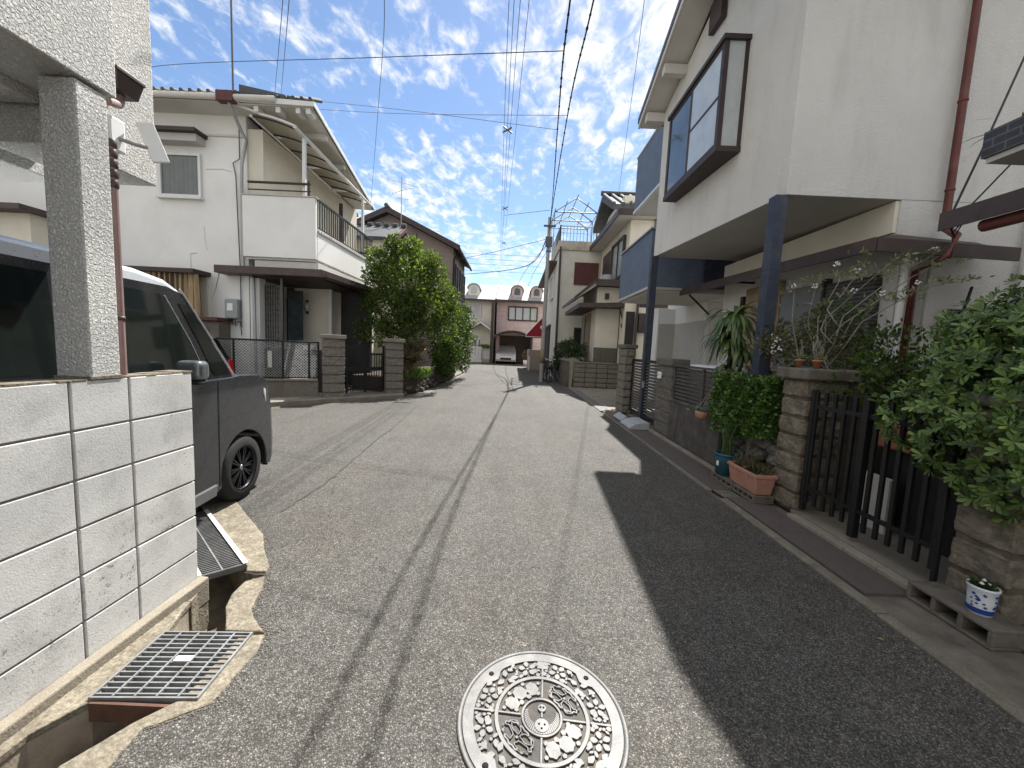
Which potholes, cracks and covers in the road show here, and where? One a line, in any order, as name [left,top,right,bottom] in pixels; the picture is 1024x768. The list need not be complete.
drain grate [194,509,249,580]
drain grate [88,631,254,704]
manhole cover [457,651,629,768]
crack [281,406,417,512]
